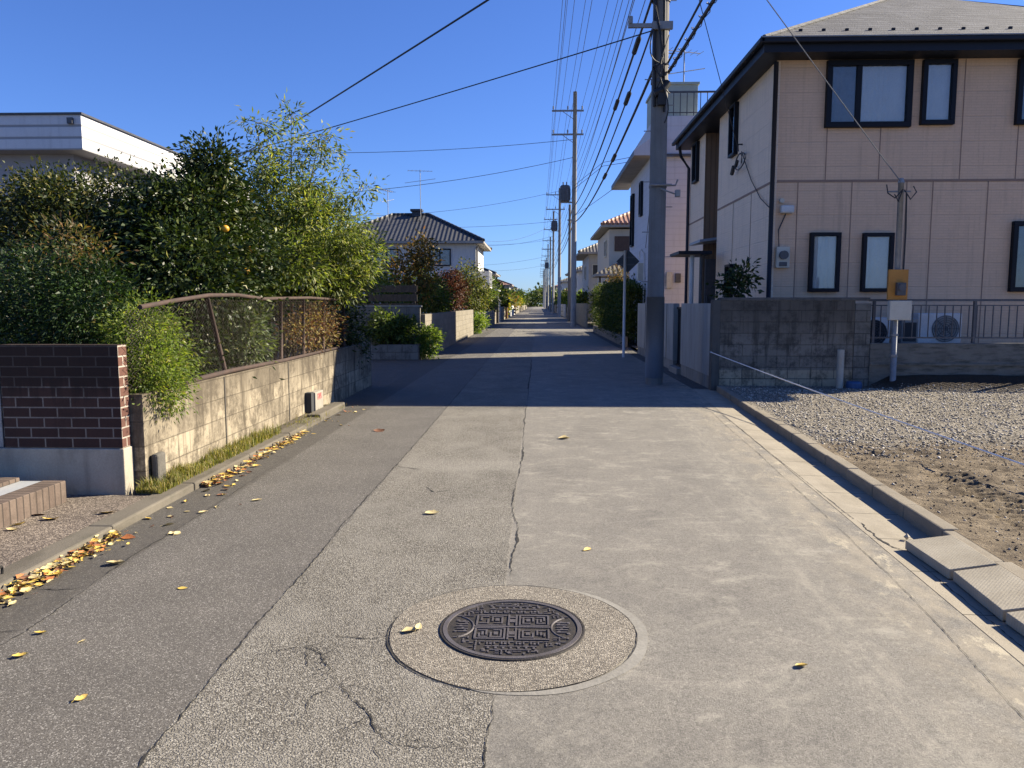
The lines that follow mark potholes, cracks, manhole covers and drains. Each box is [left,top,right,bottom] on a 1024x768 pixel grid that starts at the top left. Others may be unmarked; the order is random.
manhole cover [439,599,585,662]
crack [387,359,637,768]
crack [137,367,482,768]
